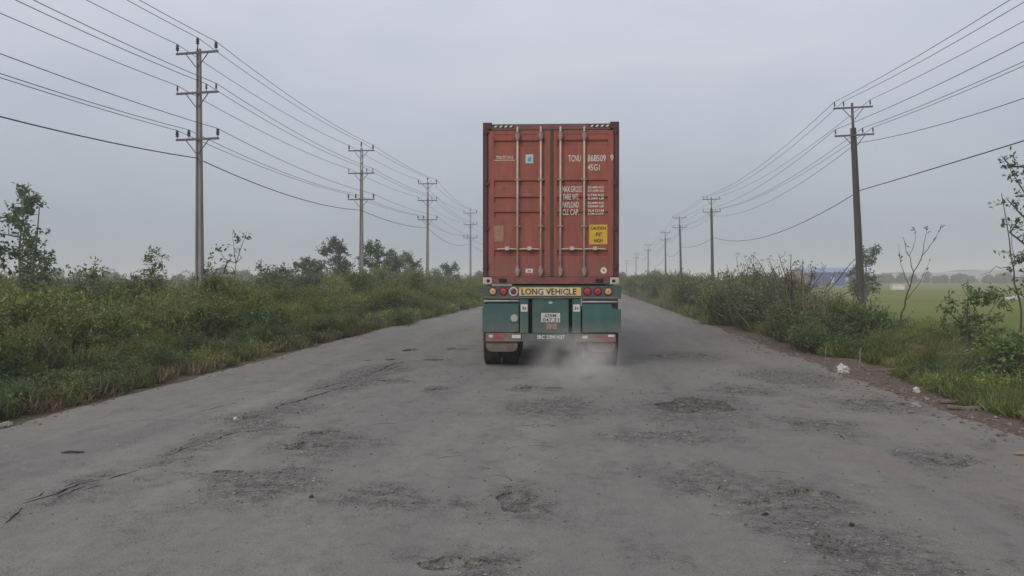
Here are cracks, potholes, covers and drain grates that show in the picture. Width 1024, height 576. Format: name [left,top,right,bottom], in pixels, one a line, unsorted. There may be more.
pothole [653,395,737,413]
crack [275,382,347,410]
pothole [283,442,332,451]
crack [5,431,241,524]
pothole [742,499,786,510]
pothole [416,556,494,571]
pothole [774,488,841,499]
pothole [808,532,856,558]
pothole [495,491,538,513]
pothole [929,456,974,469]
